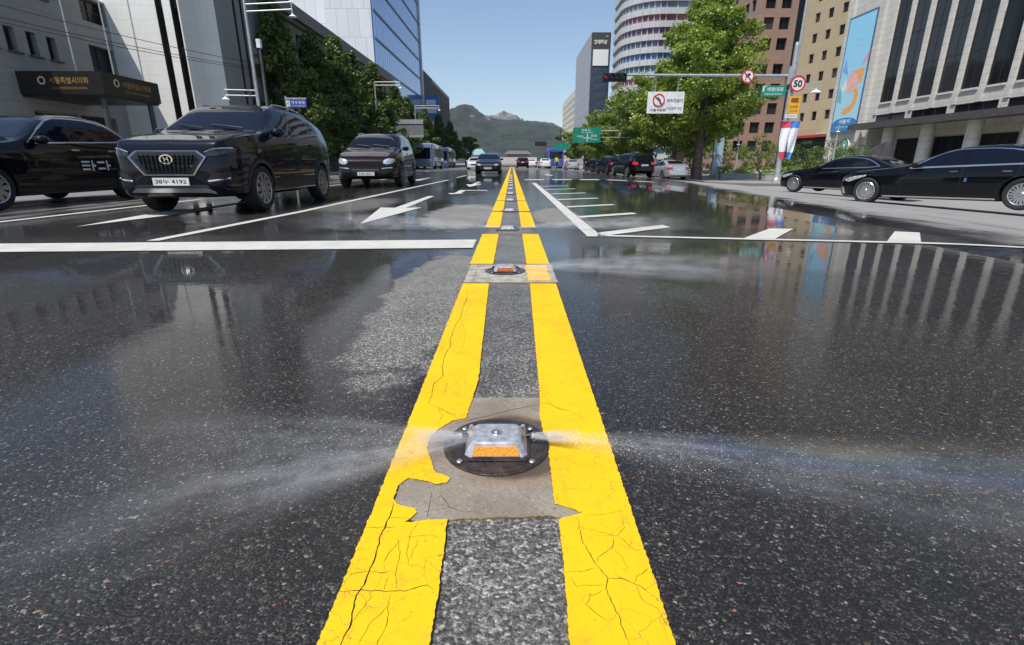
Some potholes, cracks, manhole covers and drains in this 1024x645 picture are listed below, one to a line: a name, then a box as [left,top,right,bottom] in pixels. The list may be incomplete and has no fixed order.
crack [341,504,410,644]
